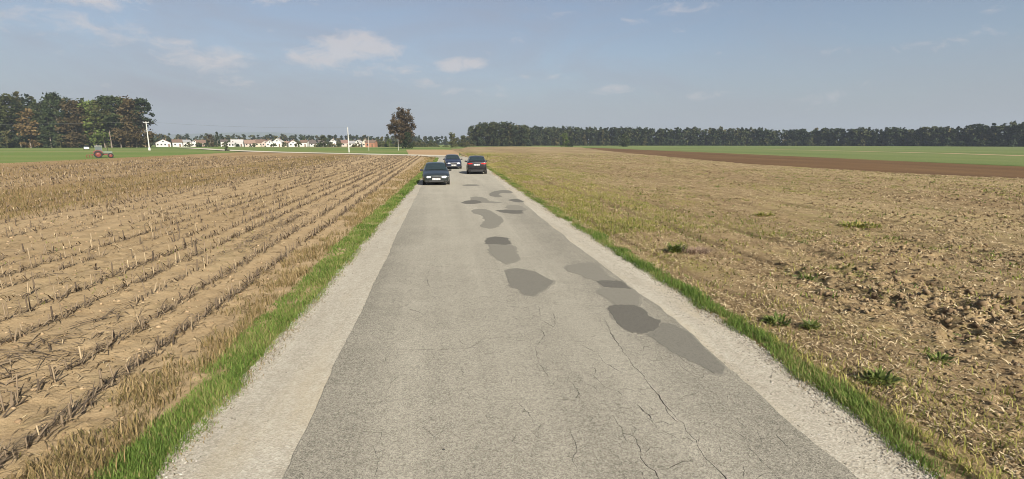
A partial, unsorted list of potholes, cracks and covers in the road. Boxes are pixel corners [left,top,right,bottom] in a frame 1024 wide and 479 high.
crack [479,267,829,479]
